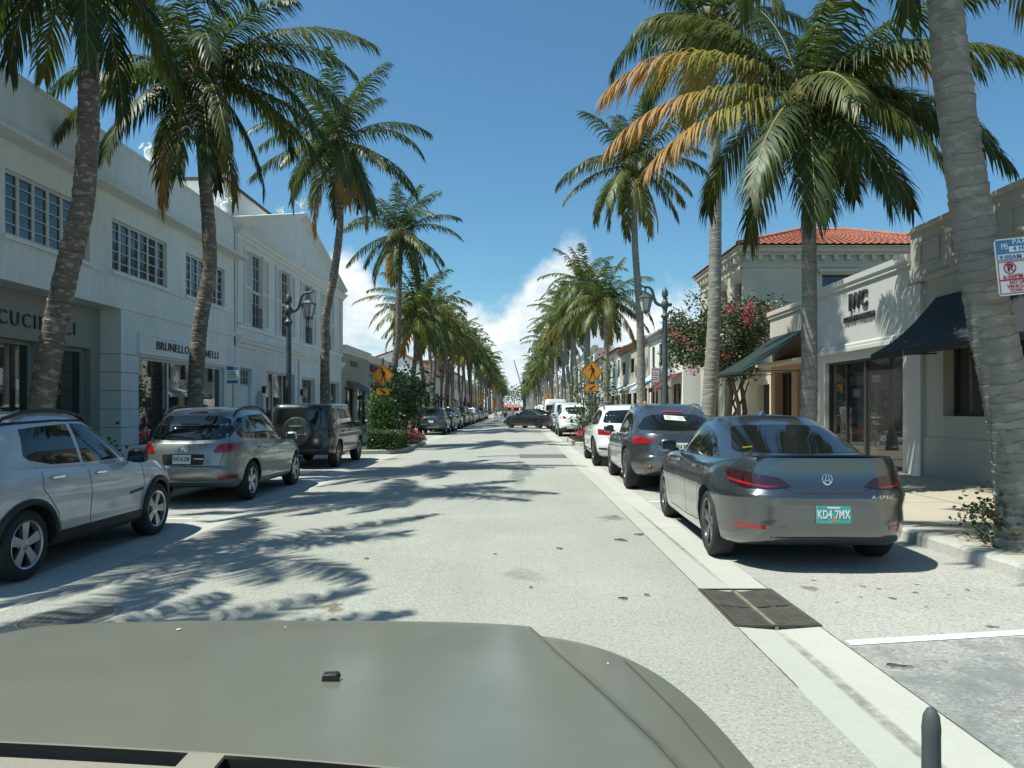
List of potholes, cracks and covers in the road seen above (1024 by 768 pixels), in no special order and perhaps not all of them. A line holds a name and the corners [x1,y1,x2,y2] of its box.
manhole cover [8,604,123,631]
drain grate [698,588,822,630]
